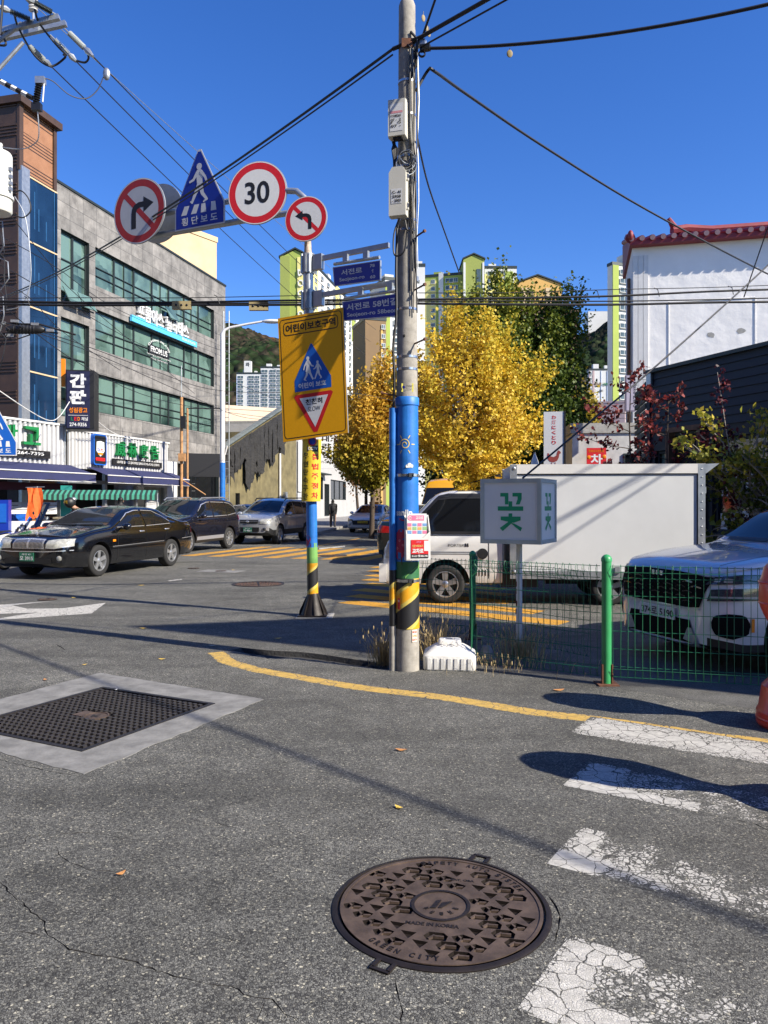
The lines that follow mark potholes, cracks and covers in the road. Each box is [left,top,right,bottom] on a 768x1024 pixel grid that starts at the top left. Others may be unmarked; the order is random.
crack [20,832,146,878]
crack [395,981,403,1022]
manhole cover [332,853,552,976]
crack [1,883,298,1024]
